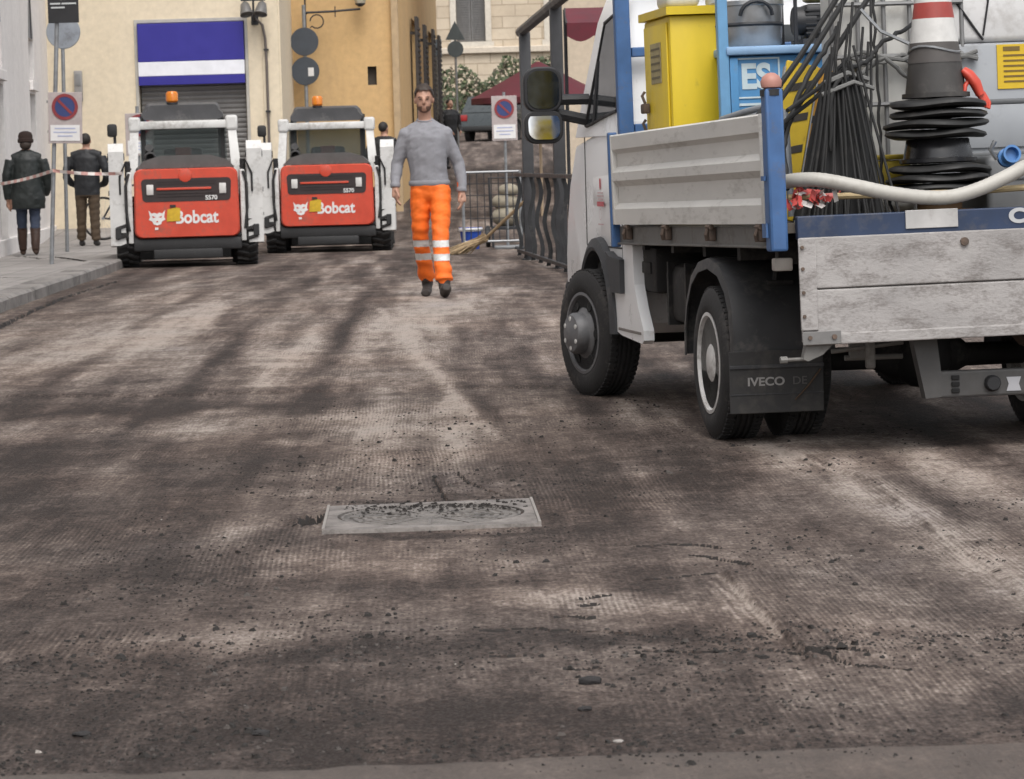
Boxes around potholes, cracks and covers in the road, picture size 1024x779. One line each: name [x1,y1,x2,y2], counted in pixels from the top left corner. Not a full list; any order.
crack [633,543,754,580]
crack [432,471,505,501]
crack [479,594,912,671]
manhole cover [321,496,542,535]
